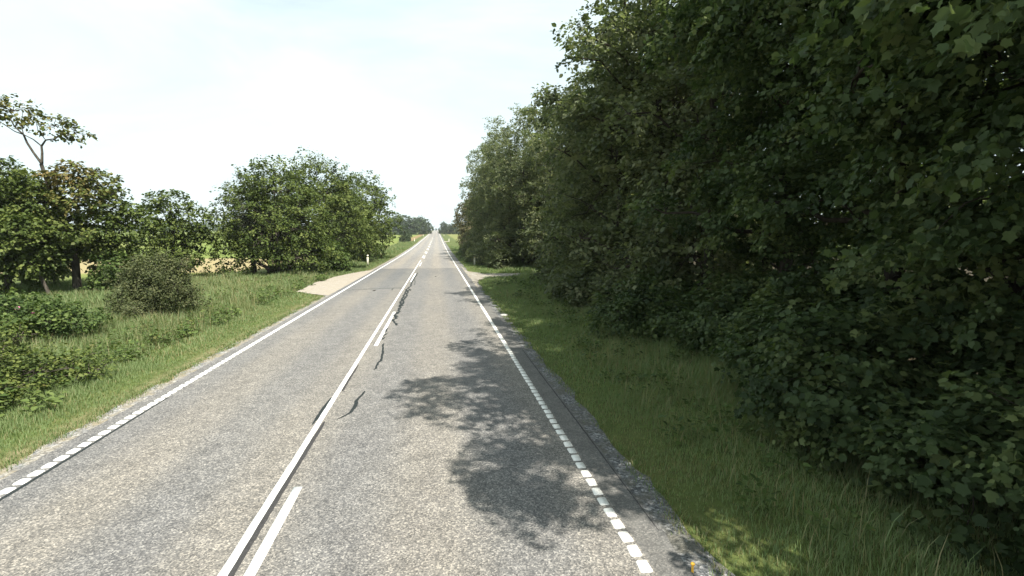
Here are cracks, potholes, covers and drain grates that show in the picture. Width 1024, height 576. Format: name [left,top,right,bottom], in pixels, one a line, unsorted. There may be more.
crack [338,268,446,326]
